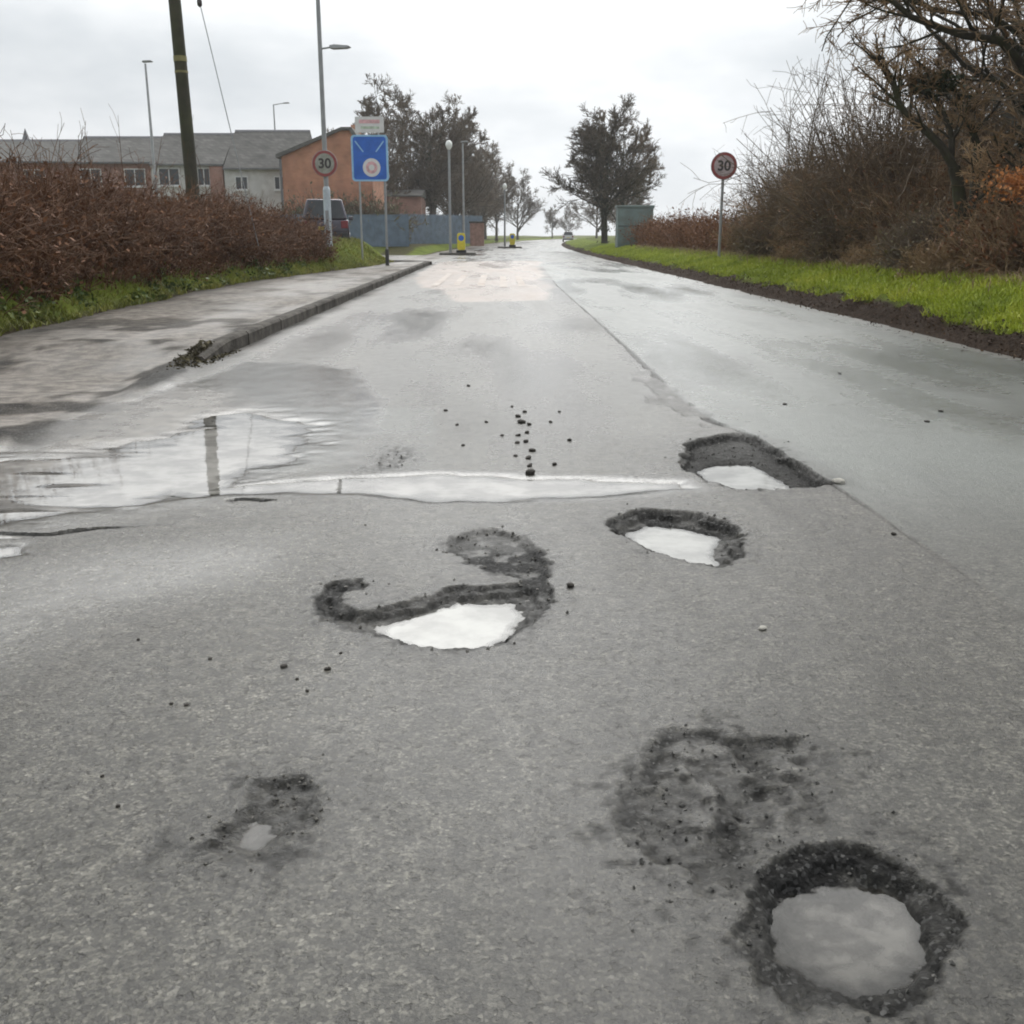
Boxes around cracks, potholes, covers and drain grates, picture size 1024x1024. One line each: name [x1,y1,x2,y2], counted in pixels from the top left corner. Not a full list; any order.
pothole [599,503,752,569]
pothole [148,753,332,873]
pothole [664,431,836,492]
crack [0,525,151,540]
pothole [306,524,569,653]
pothole [715,833,984,1024]
pothole [357,444,418,474]
pothole [613,718,895,945]
